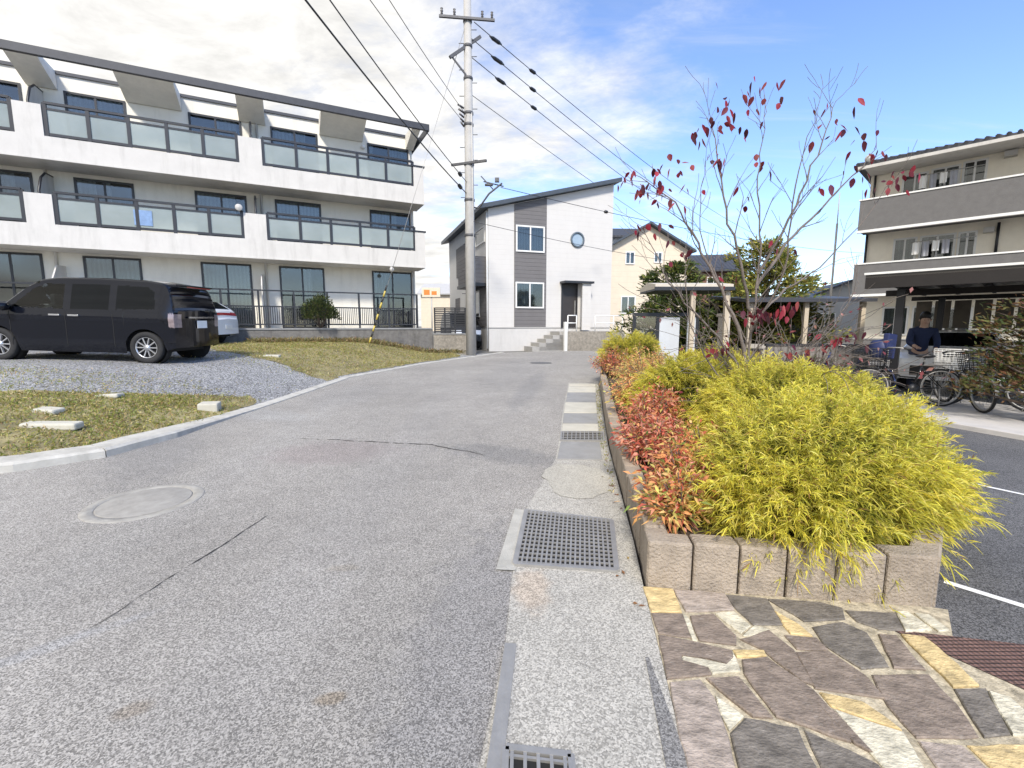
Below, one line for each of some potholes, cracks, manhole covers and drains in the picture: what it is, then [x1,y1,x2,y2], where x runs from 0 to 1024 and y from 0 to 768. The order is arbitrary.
drain grate [501,743,576,768]
crack [301,438,482,455]
drain grate [512,509,620,573]
drain grate [560,431,605,442]
crack [92,513,271,627]
manhole cover [78,484,205,524]
